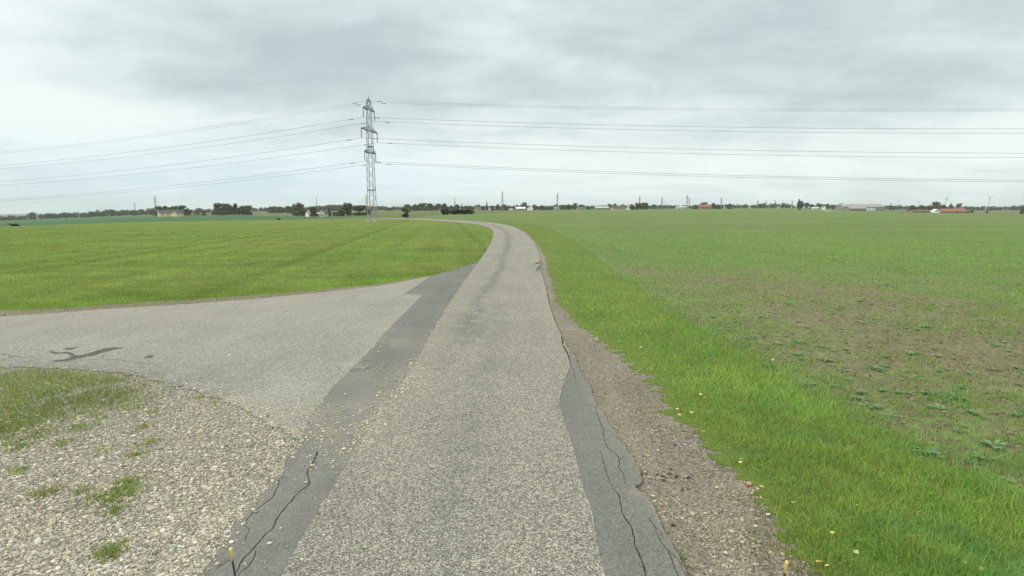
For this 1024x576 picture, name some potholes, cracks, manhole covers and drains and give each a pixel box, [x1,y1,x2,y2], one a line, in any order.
crack [546,290,575,375]
crack [216,452,318,576]
crack [585,405,686,576]
